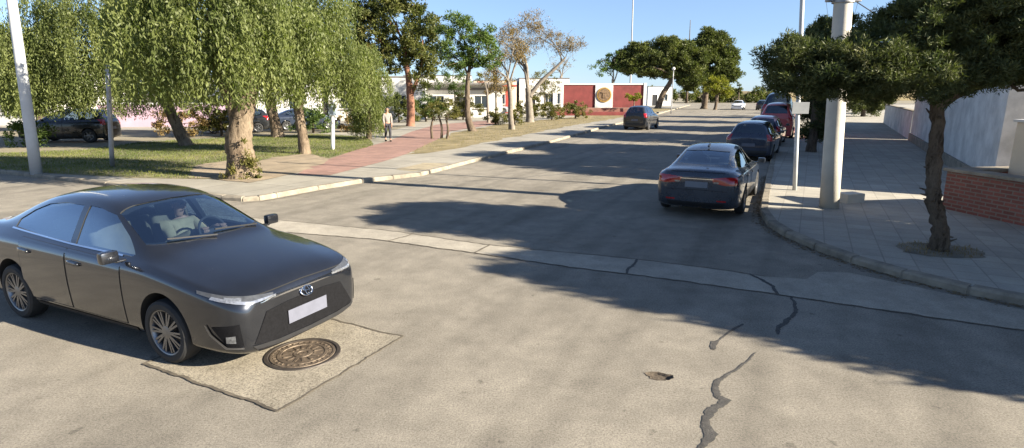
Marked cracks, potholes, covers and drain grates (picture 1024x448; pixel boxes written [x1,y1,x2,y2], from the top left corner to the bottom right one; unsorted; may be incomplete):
pothole [645,371,674,380]
crack [710,324,744,350]
crack [750,274,798,334]
manhole cover [263,338,341,371]
